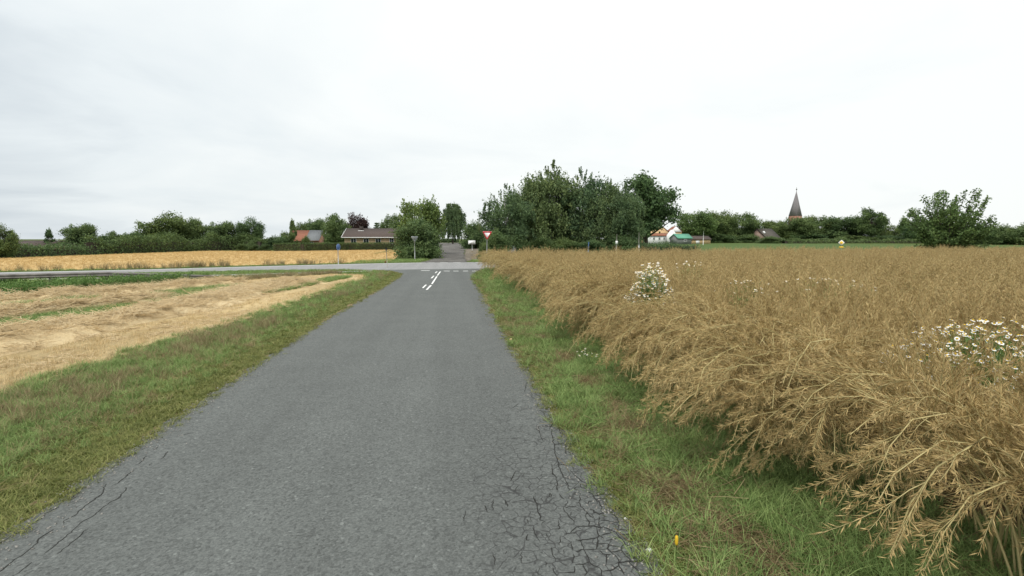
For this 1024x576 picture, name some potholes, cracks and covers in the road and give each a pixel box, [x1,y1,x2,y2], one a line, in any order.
crack [463,383,653,576]
crack [0,448,166,571]
